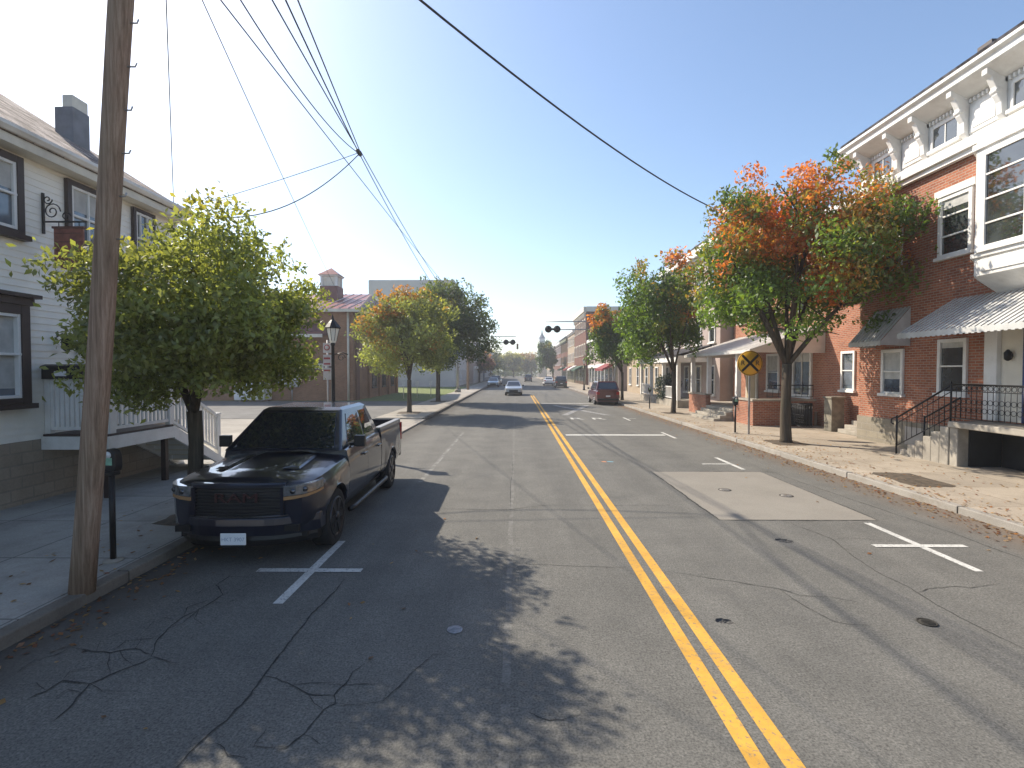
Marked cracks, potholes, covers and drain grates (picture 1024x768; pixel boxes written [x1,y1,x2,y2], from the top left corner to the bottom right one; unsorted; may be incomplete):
manhole cover [916,618,938,627]
crack [18,576,251,720]
crack [793,524,1014,644]
manhole cover [447,625,463,634]
crack [217,654,444,758]
